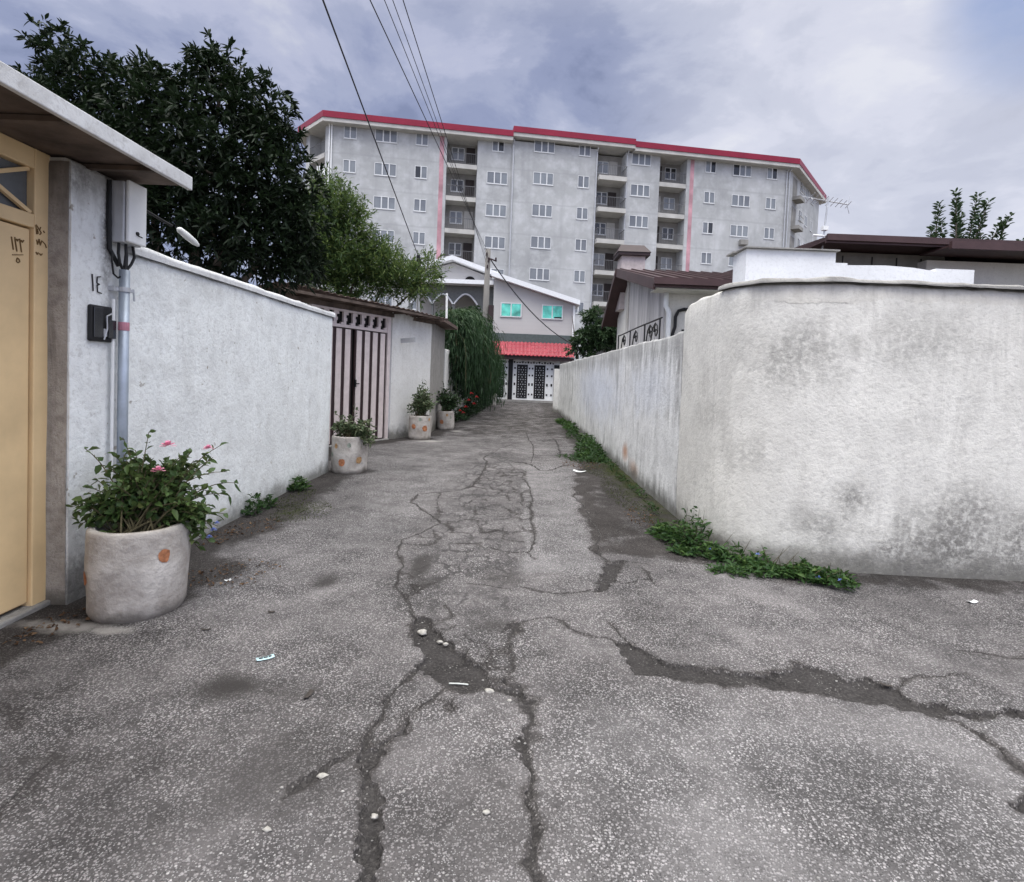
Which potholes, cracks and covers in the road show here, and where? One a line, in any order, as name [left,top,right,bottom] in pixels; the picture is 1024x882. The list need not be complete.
crack [394,431,1024,882]
pothole [410,616,525,702]
crack [281,669,457,882]
